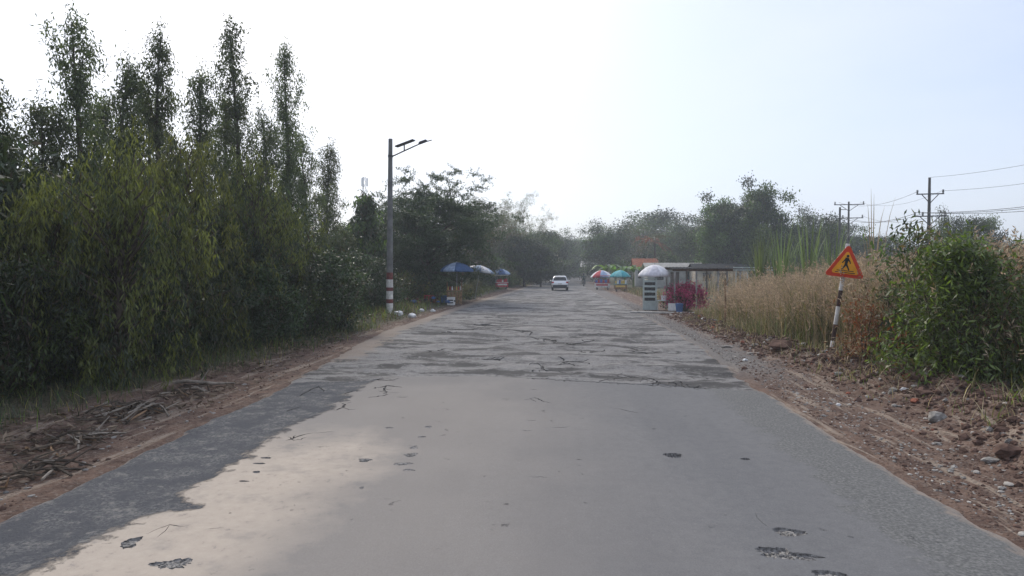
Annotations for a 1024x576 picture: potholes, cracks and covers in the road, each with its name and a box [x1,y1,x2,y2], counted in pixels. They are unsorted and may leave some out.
pothole [120,536,143,549]
pothole [772,527,808,537]
pothole [755,546,825,561]
crack [337,378,398,410]
crack [426,324,708,403]
pothole [148,558,193,569]
